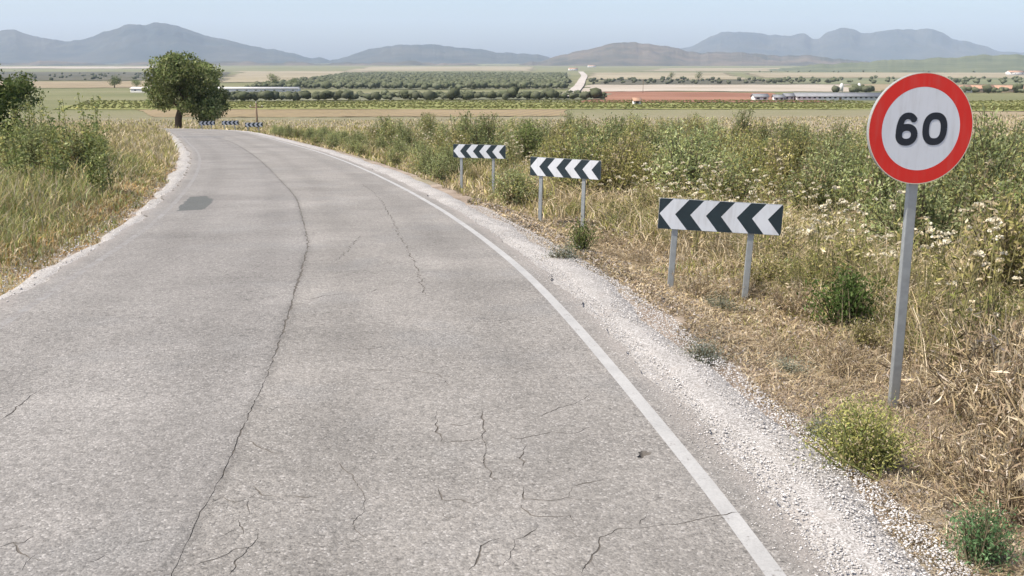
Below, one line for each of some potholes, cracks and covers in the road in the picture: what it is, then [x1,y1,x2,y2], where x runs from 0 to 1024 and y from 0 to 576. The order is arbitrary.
crack [468,479,734,571]
crack [435,396,599,479]
crack [0,524,47,568]
crack [365,186,426,294]
crack [193,485,317,575]
crack [438,488,487,518]
crack [337,460,368,539]
